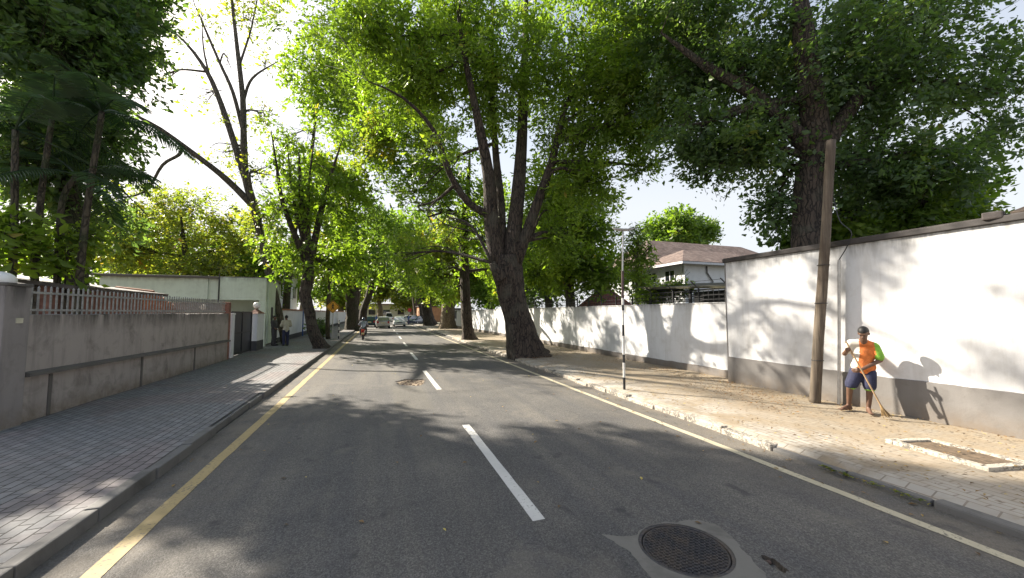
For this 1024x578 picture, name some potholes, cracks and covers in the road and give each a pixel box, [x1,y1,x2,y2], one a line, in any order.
manhole cover [601,519,766,578]
